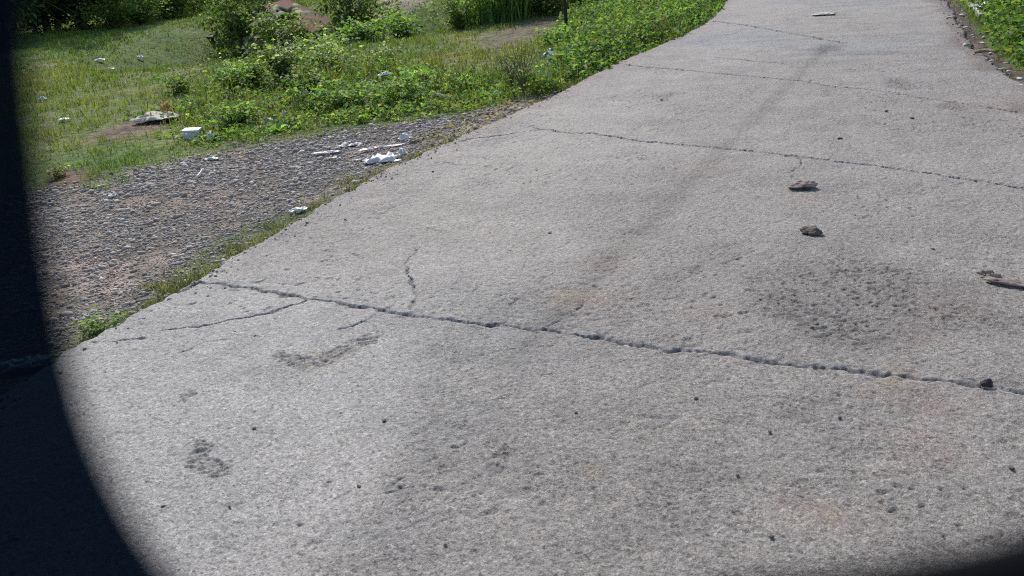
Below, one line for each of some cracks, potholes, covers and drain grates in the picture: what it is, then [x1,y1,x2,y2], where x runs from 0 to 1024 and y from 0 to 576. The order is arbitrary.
crack [175,338,229,355]
